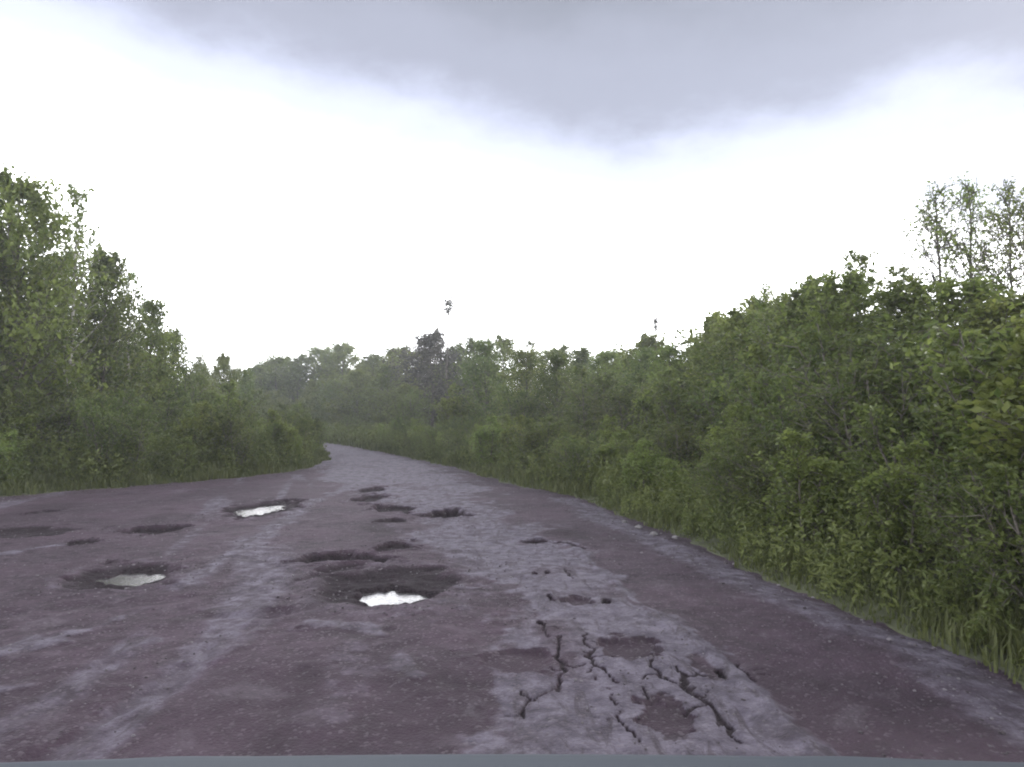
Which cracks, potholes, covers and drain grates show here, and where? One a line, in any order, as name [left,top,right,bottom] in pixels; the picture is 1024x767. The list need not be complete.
pothole [373,539,423,552]
pothole [53,559,189,590]
pothole [199,498,308,521]
crack [498,622,771,744]
pothole [291,561,494,629]
pothole [409,507,475,521]
pothole [367,503,426,514]
pothole [595,632,667,661]
pothole [547,594,597,612]
pothole [280,550,404,565]
pothole [0,522,84,538]
pothole [608,687,701,742]
